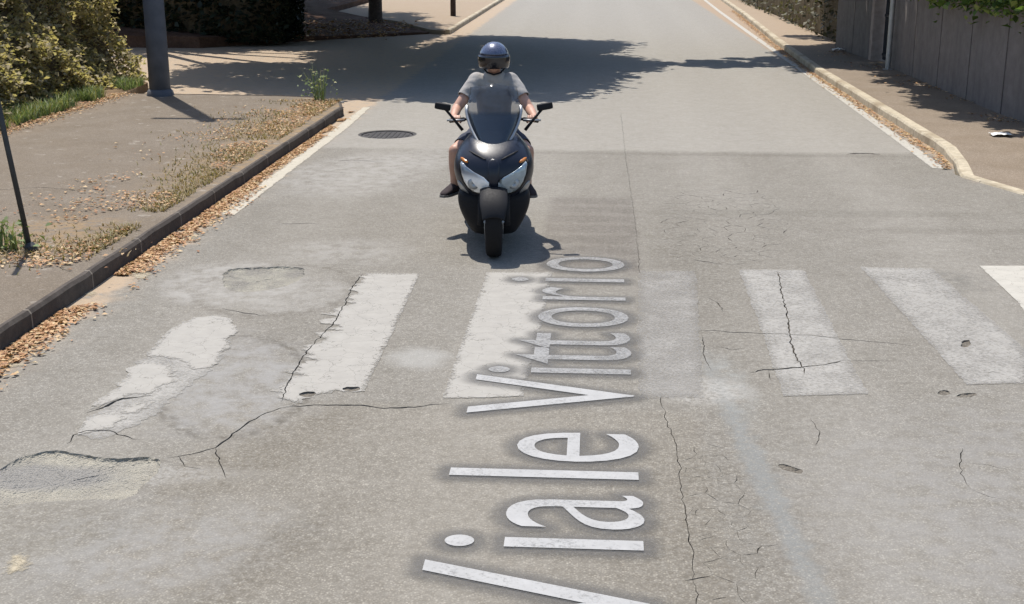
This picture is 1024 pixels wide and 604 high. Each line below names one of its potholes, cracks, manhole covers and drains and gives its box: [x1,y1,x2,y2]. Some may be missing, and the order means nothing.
crack [679,445,778,602]
manhole cover [358,130,416,139]
crack [701,274,915,378]
crack [661,189,787,264]
crack [87,396,144,413]
crack [169,277,448,476]
pothole [778,464,803,474]
